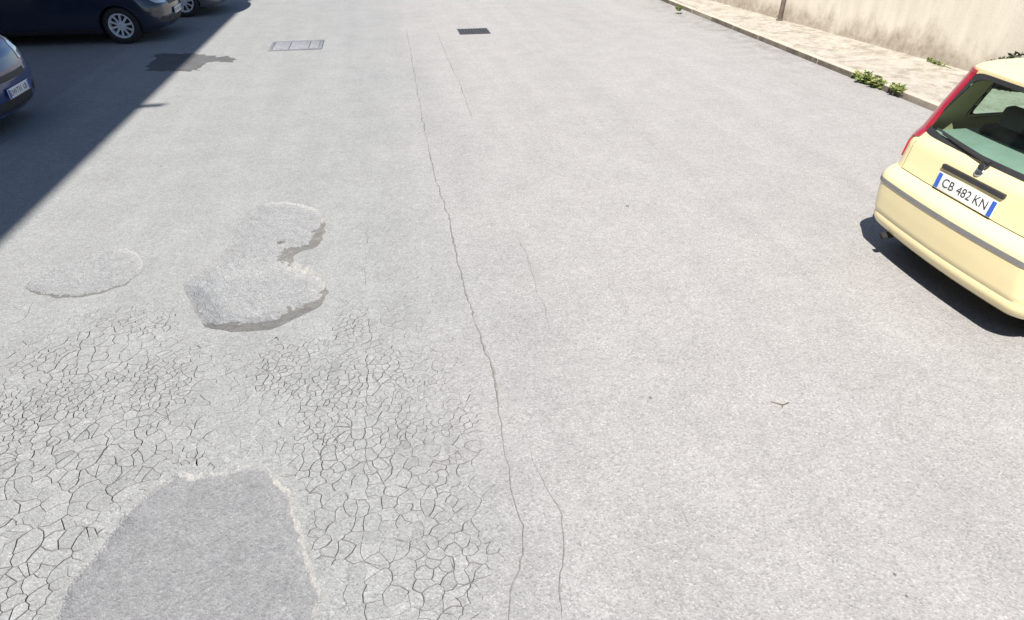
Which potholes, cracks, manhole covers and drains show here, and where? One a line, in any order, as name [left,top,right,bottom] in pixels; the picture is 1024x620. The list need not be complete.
manhole cover [268,40,324,51]
crack [0,35,565,620]
pothole [183,201,329,332]
pothole [24,247,143,298]
